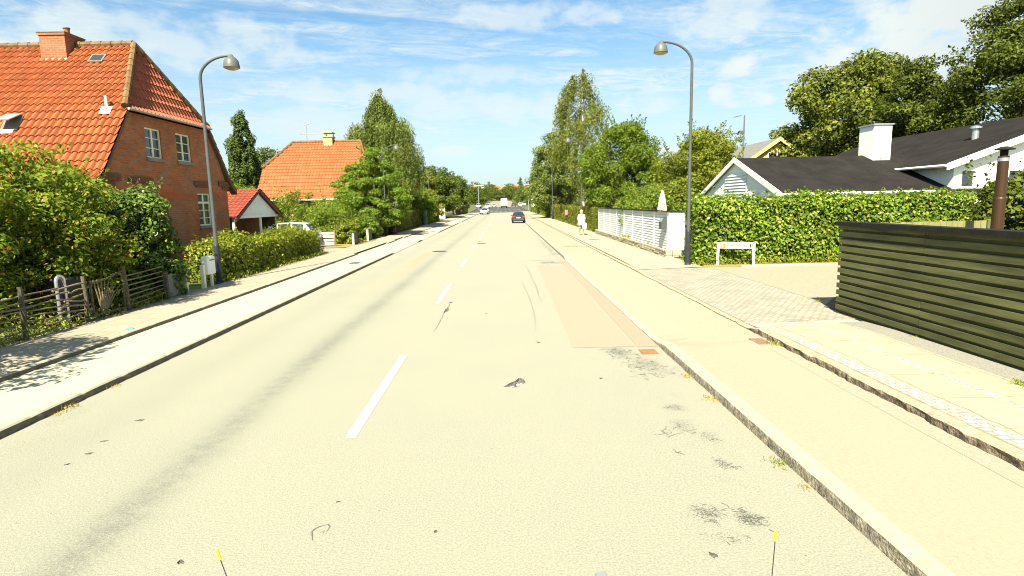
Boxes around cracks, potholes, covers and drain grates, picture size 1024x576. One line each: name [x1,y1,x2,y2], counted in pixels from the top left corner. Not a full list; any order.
crack [521,243,560,329]
pothole [504,377,526,387]
